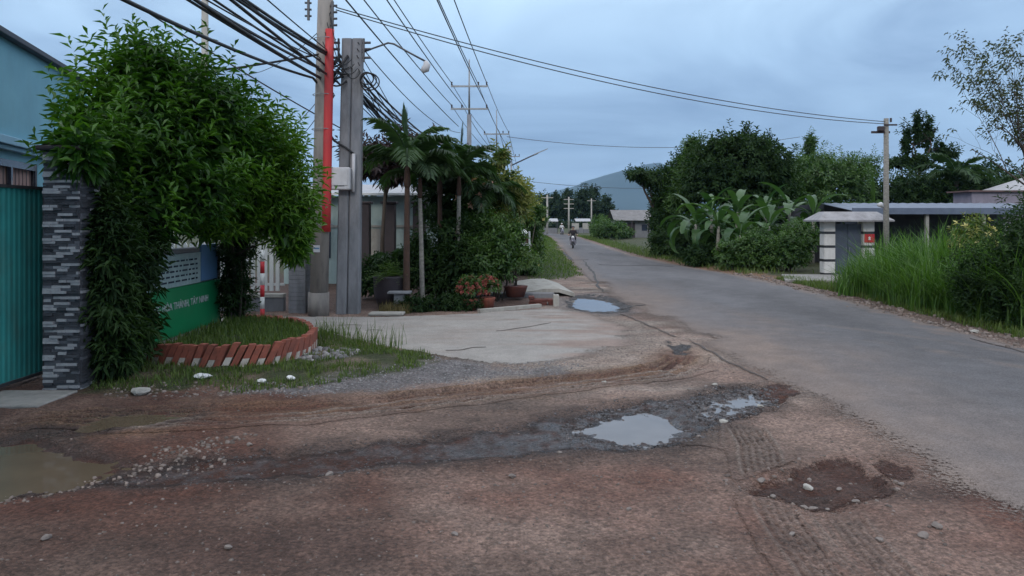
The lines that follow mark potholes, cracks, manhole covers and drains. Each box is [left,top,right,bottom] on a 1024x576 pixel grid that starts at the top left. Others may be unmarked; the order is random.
pothole [0,438,132,502]
pothole [564,294,632,314]
crack [563,252,673,292]
pothole [742,454,897,515]
pothole [569,387,778,449]
pothole [872,459,914,481]
pothole [665,341,693,355]
crack [620,305,768,380]
